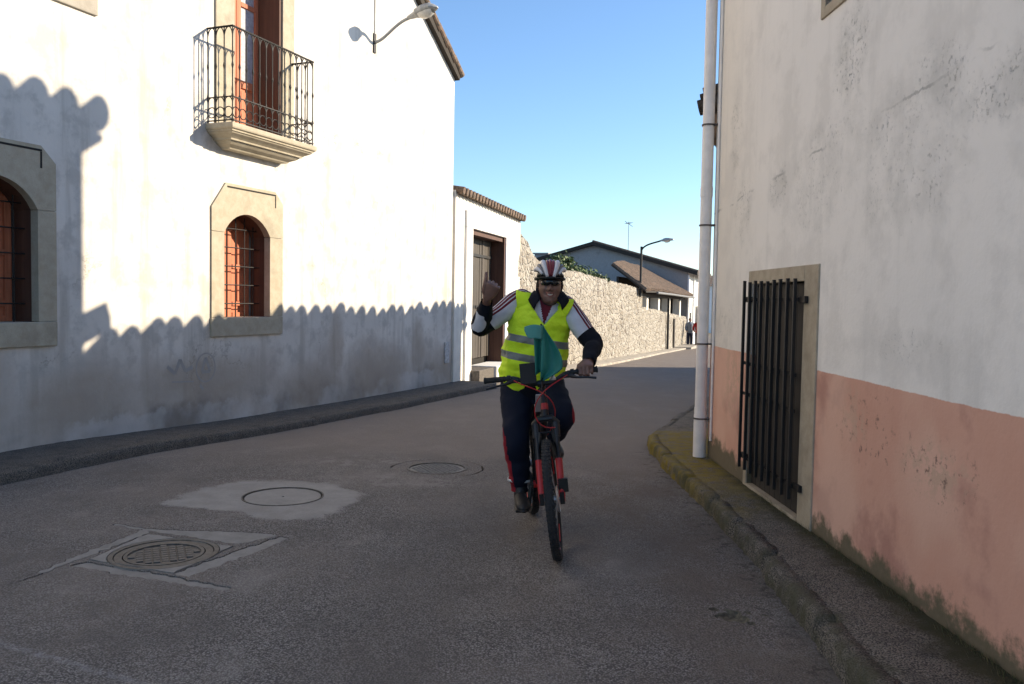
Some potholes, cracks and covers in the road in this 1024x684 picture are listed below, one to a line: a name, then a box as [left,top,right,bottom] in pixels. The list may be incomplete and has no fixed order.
manhole cover [154,478,371,523]
manhole cover [407,462,467,474]
